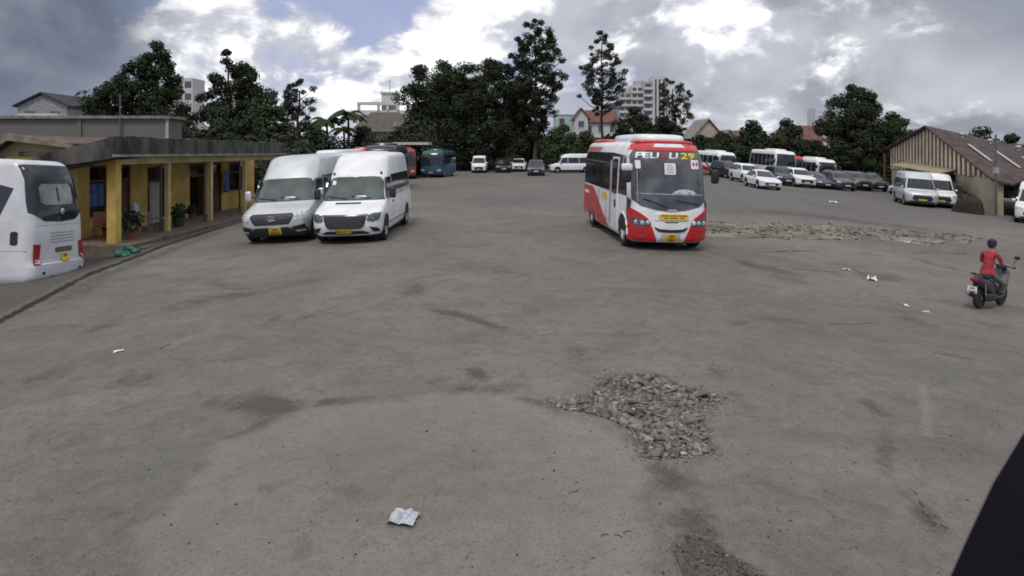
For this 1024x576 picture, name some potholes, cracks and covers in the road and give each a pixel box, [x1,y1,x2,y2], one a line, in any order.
crack [910,489,948,528]
pothole [532,365,757,477]
pothole [646,516,788,576]
